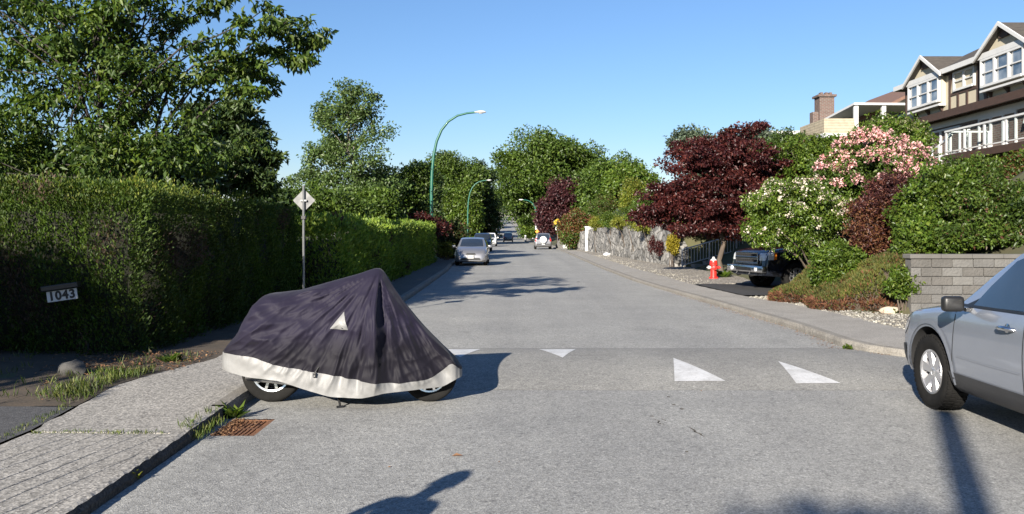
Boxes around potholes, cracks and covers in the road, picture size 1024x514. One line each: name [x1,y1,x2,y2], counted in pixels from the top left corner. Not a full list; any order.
drain grate [211,420,274,436]
